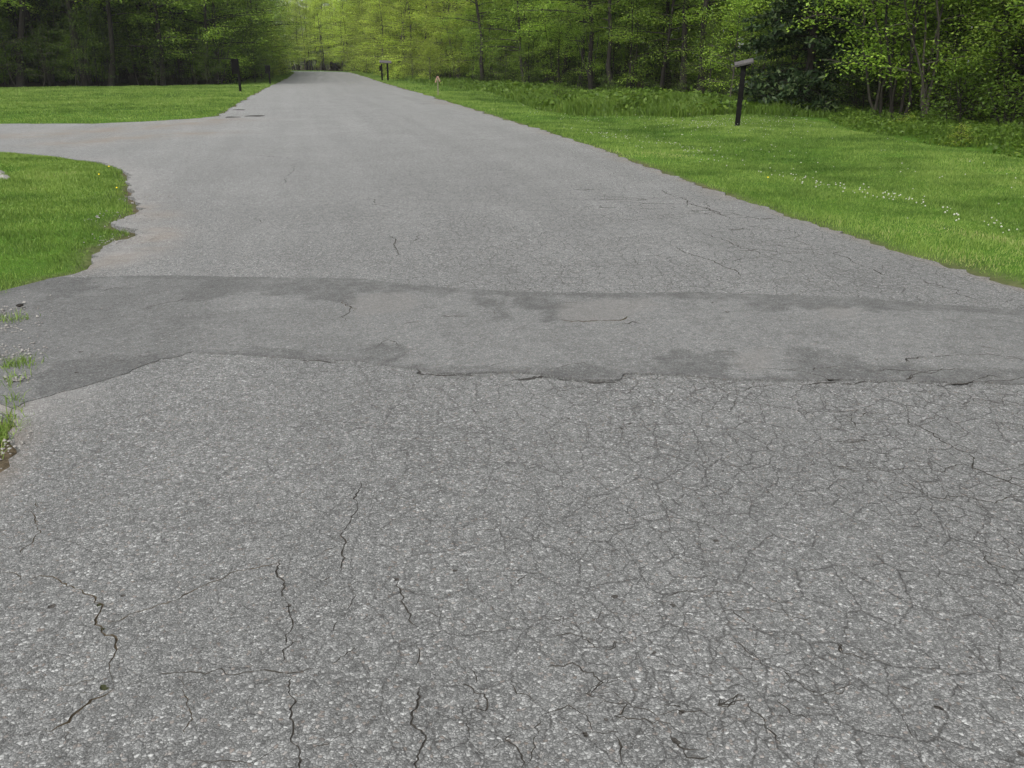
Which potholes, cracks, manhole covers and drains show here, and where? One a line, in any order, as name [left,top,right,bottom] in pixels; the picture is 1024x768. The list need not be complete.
crack [396,579,495,768]
crack [837,642,890,664]
crack [715,342,1024,574]
crack [577,189,888,277]
crack [0,482,375,768]
crack [461,586,852,768]
